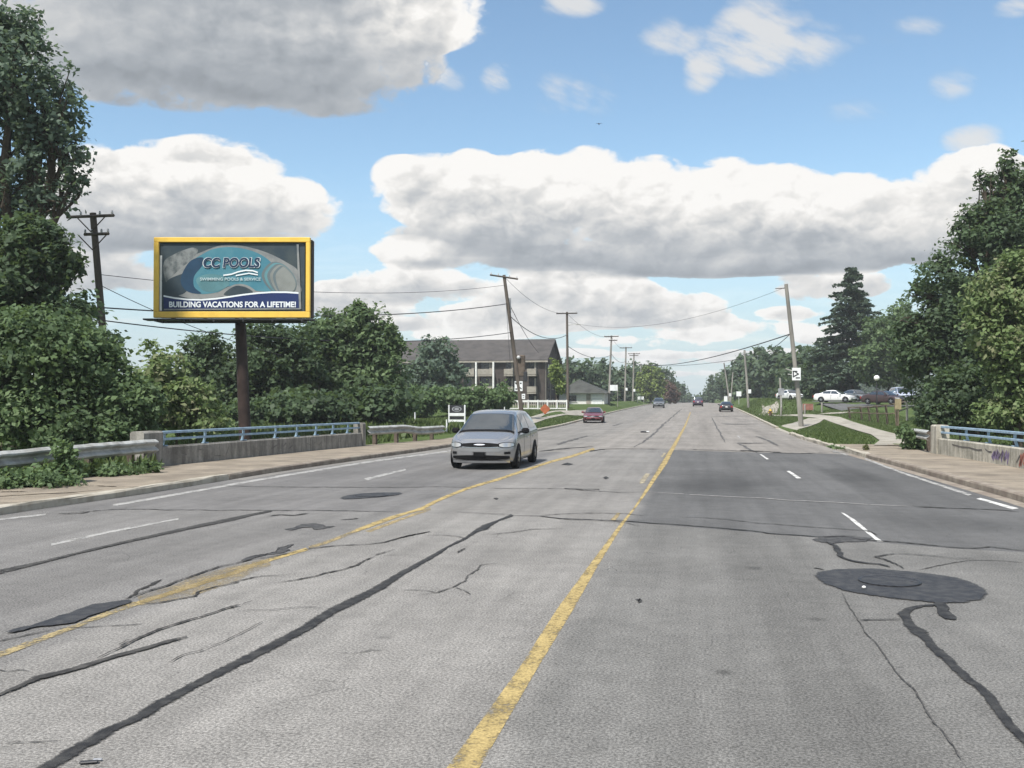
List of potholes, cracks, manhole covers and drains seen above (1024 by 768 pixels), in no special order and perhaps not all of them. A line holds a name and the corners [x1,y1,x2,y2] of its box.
crack [844,597,966,767]
manhole cover [858,575,922,587]
crack [410,513,644,594]
crack [125,531,430,603]
